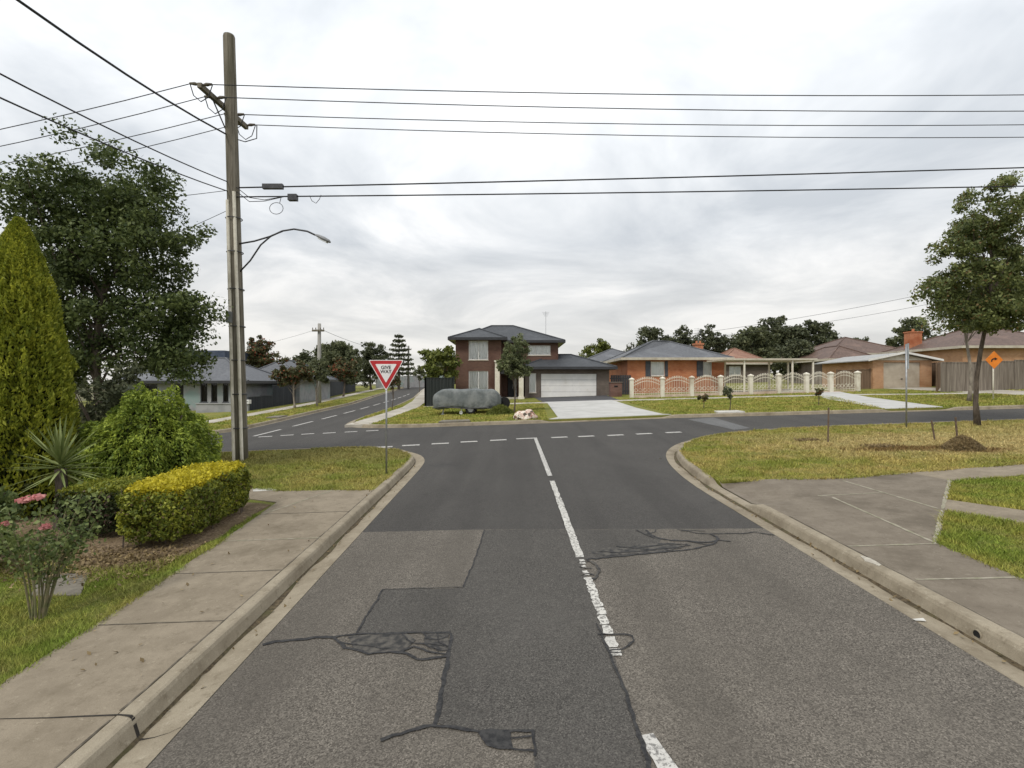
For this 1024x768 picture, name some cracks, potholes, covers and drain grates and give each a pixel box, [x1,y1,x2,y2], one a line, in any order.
crack [577,529,774,579]
crack [596,623,651,768]
